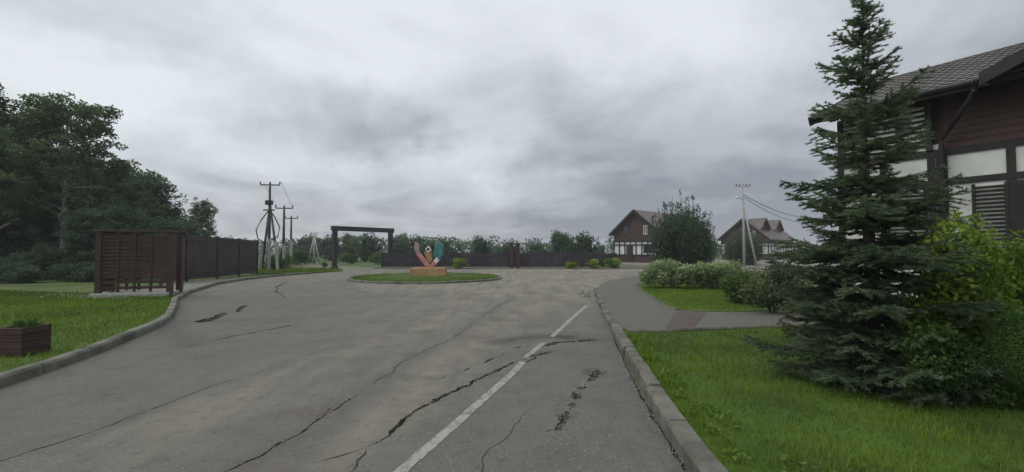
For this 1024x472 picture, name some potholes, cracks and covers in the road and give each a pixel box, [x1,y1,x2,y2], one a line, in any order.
crack [319,338,689,472]
crack [141,323,301,351]
